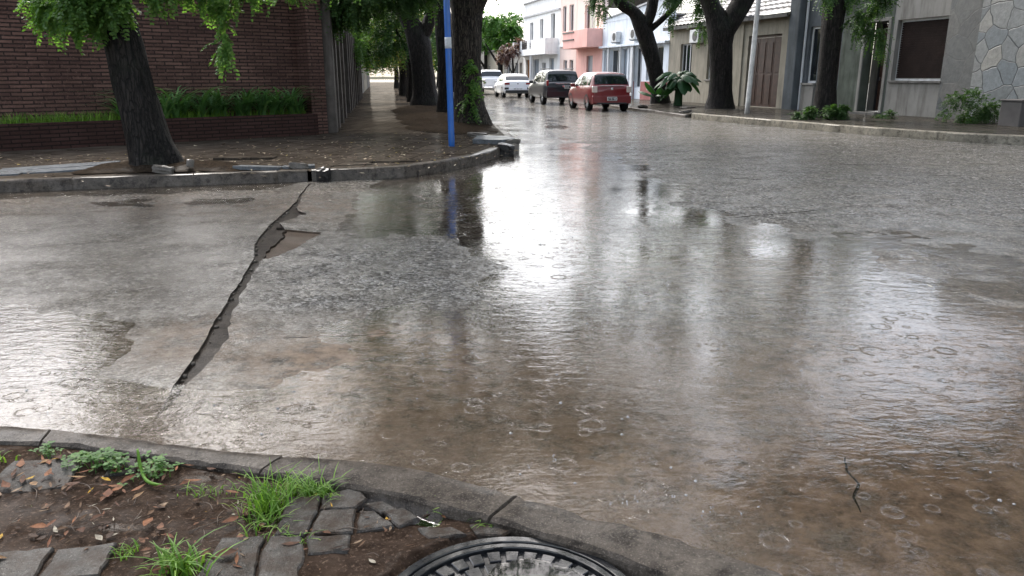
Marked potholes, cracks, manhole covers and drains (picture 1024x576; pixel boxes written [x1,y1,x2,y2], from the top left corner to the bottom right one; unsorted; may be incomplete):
crack [844,457,861,512]
crack [156,184,490,418]
pothole [263,229,321,259]
